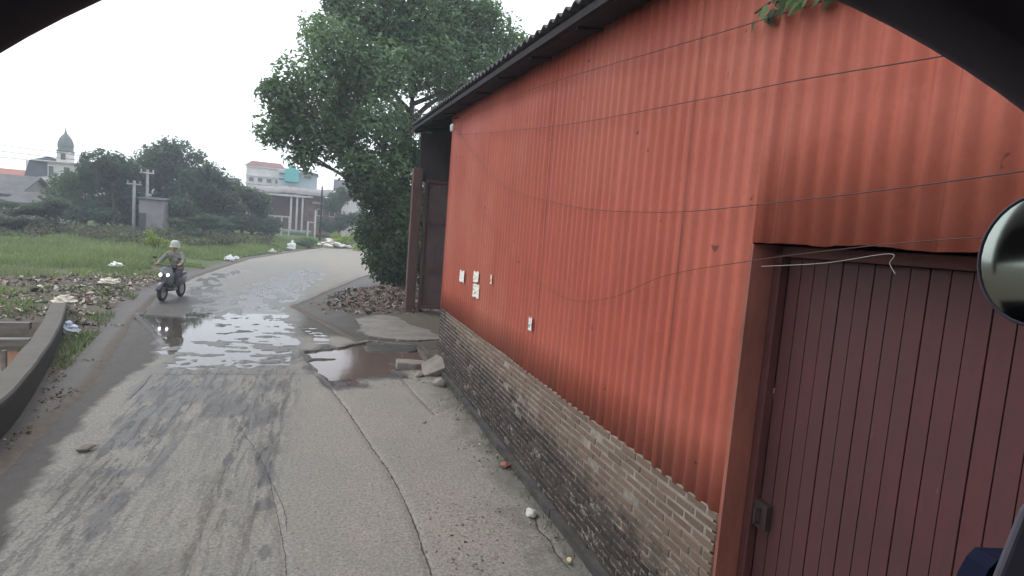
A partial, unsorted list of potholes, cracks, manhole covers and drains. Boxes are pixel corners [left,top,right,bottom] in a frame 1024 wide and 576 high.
pothole [297,340,431,389]
crack [234,418,287,576]
